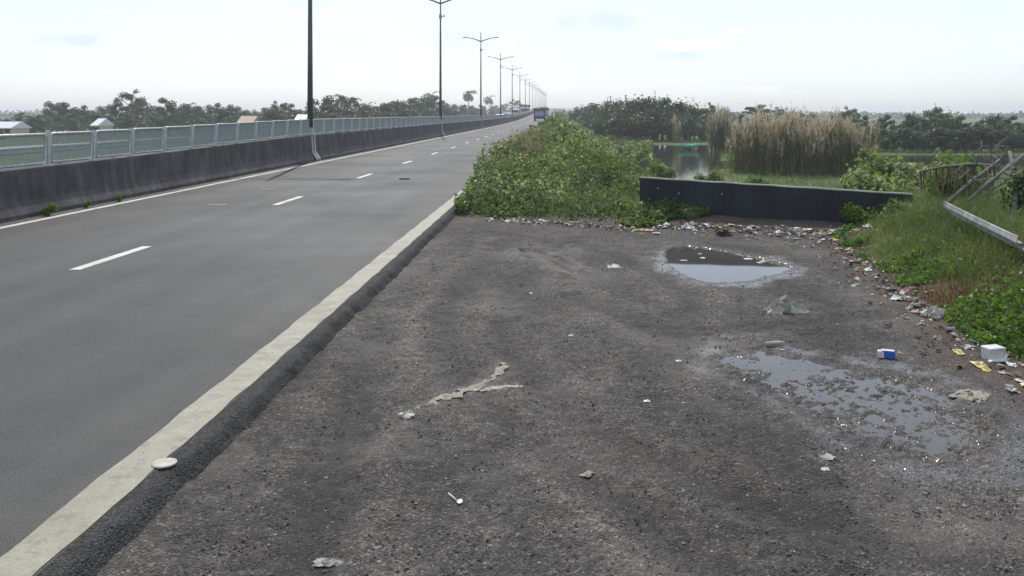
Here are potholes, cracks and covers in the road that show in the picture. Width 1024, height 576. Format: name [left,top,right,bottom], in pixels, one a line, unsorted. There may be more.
pothole [697,343,1024,476]
pothole [659,245,801,284]
